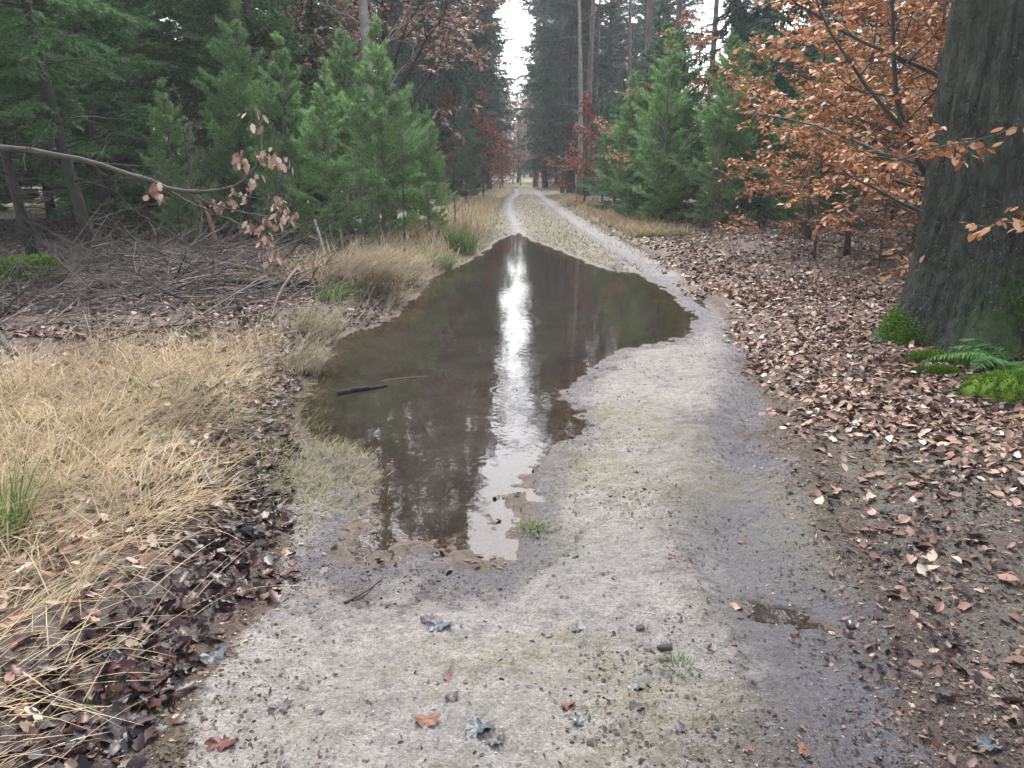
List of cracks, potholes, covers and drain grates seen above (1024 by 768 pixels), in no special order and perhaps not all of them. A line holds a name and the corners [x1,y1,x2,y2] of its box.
pothole [735,593,843,634]
